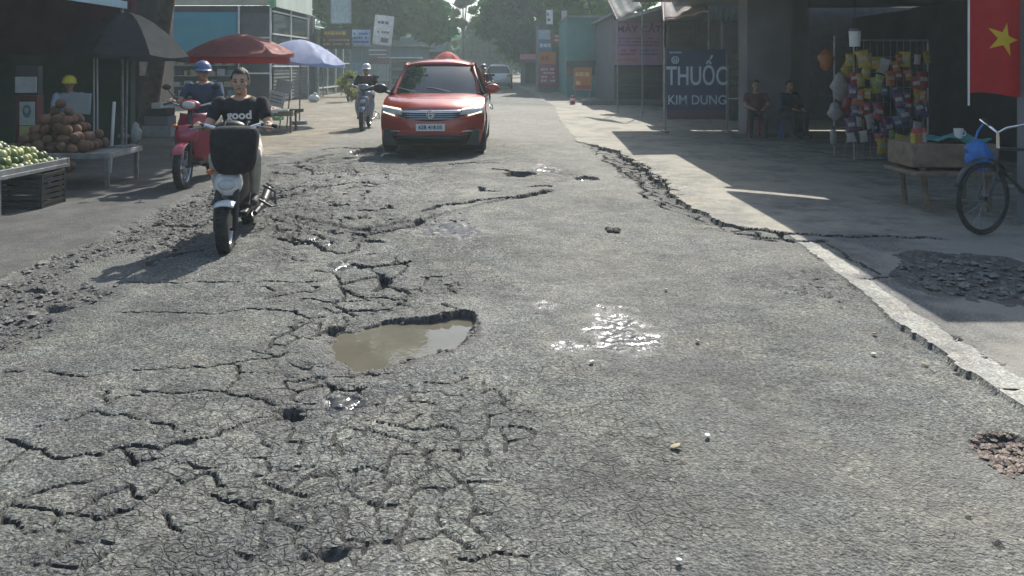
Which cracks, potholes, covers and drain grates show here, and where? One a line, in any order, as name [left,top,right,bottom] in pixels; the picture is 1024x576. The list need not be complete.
pothole [320,309,486,379]
crack [0,147,552,576]
pothole [277,405,309,425]
pothole [966,431,1024,476]
crack [583,146,946,243]
pothole [889,249,1024,307]
